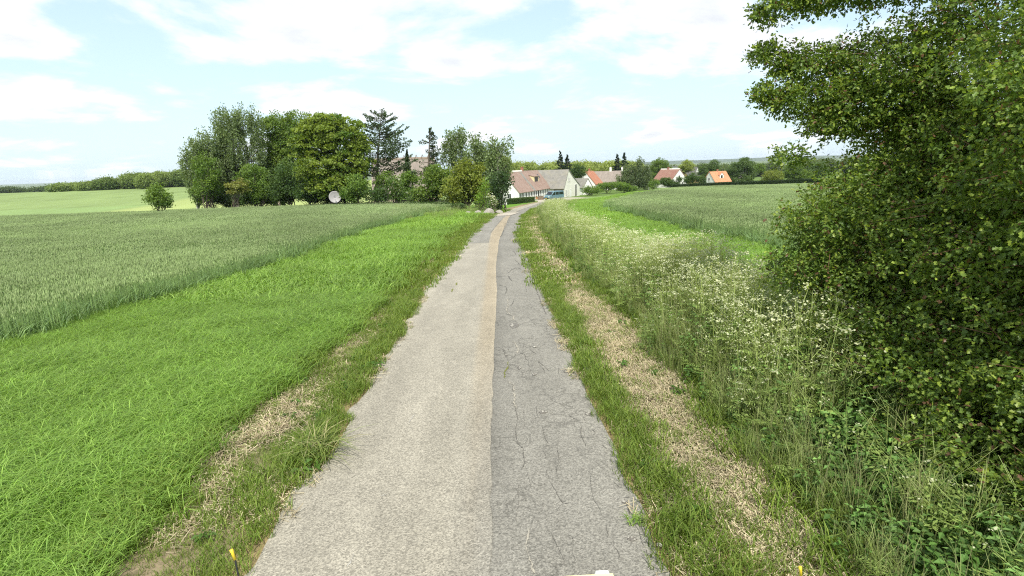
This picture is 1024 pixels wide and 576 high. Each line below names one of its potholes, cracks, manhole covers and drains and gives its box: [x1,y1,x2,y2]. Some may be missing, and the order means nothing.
crack [571,416,647,552]
crack [502,341,575,573]
crack [490,225,547,327]
